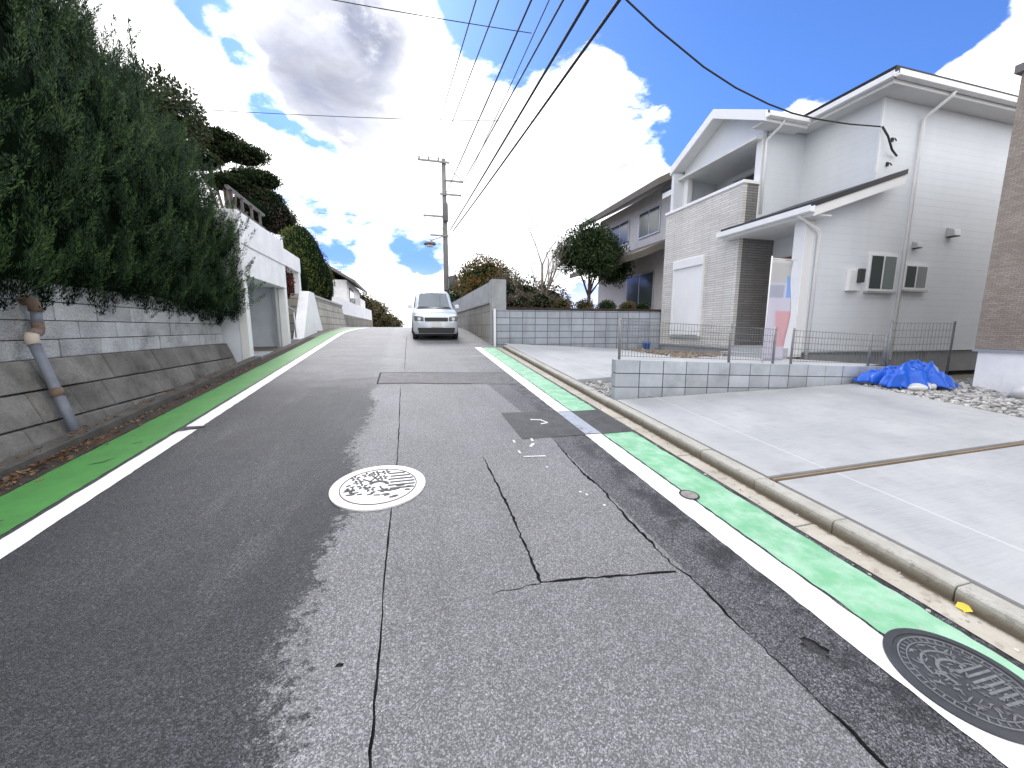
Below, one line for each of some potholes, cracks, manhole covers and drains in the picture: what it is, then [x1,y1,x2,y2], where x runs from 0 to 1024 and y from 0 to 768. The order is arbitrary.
crack [368,389,401,768]
crack [483,441,889,768]
manhole cover [329,465,425,511]
utility cover [679,490,700,500]
manhole cover [883,628,1024,745]
pothole [799,637,830,658]
